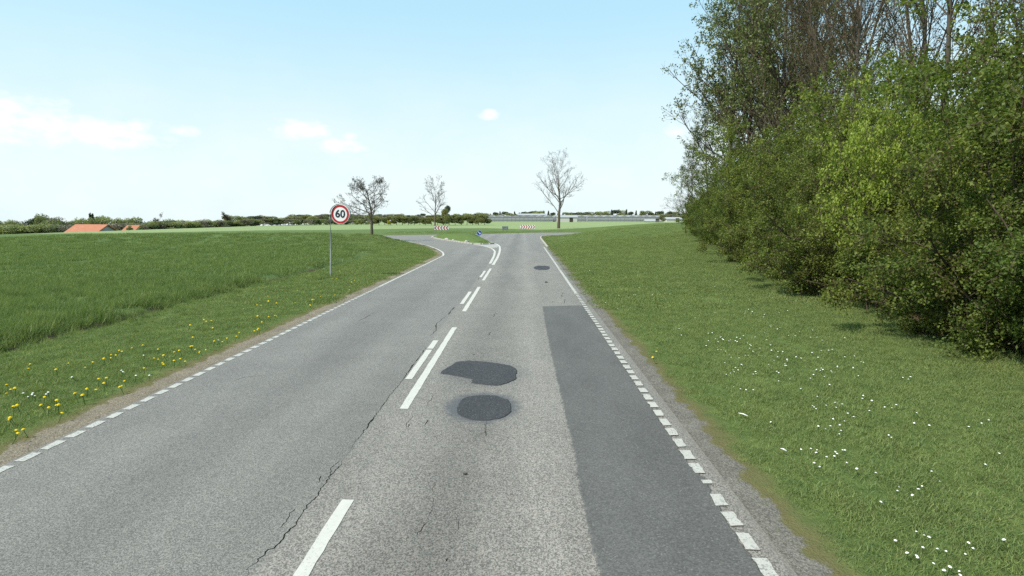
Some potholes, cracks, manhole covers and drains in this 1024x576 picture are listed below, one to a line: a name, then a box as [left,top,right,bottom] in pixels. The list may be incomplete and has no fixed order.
crack [246,273,482,575]
